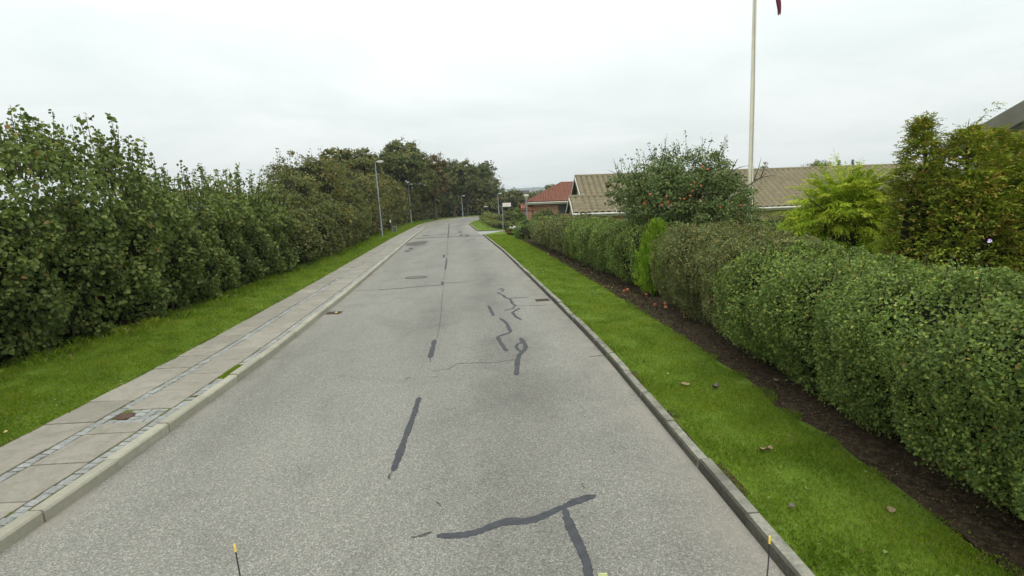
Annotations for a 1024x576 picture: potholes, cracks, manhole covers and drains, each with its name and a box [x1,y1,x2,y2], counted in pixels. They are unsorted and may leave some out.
utility cover [115,412,136,420]
crack [357,278,469,291]
